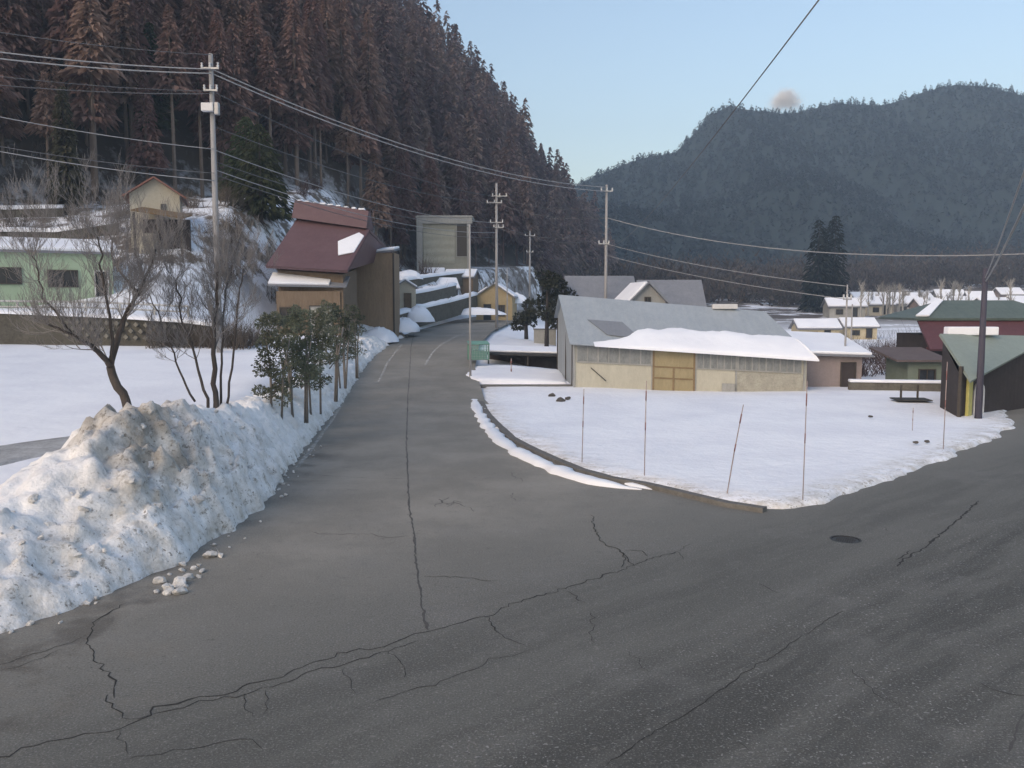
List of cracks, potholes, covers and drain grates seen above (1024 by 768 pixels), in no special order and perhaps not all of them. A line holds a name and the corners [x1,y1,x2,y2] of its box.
manhole cover [829,535,862,543]
crack [609,611,843,762]
crack [0,515,687,757]
crack [897,501,979,566]
